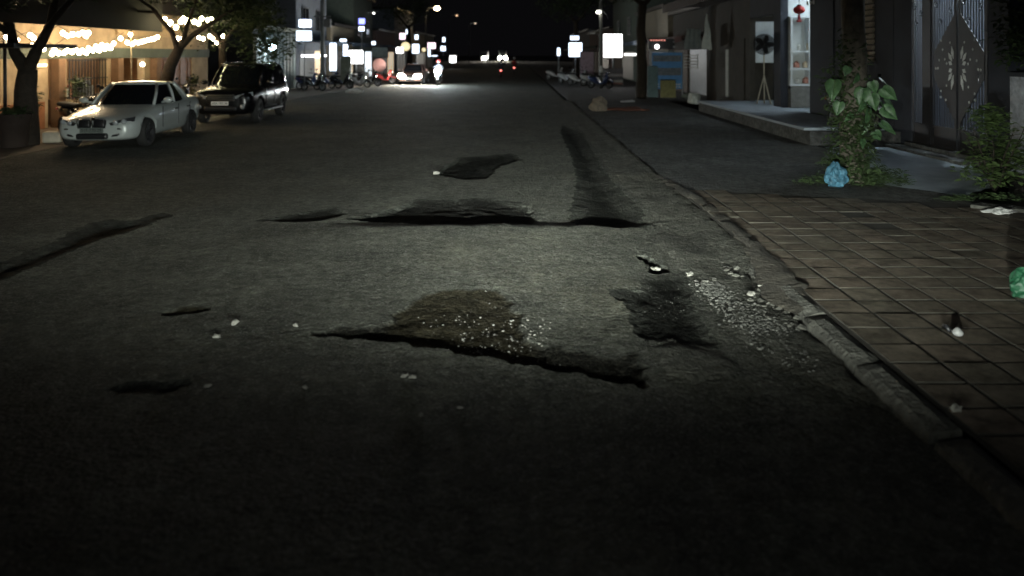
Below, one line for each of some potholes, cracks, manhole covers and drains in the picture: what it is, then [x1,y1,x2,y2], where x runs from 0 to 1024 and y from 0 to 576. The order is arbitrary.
pothole [438,154,523,181]
pothole [346,198,538,225]
pothole [107,378,192,395]
pothole [0,213,173,281]
pothole [157,305,211,316]
pothole [256,208,347,222]
pothole [560,126,648,229]
pothole [606,275,720,350]
pothole [309,289,652,390]
